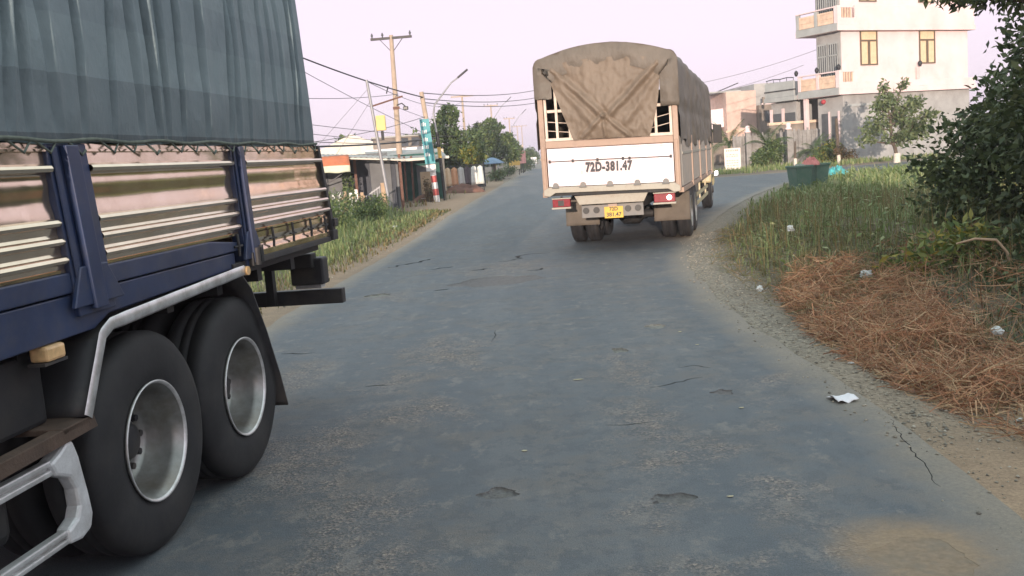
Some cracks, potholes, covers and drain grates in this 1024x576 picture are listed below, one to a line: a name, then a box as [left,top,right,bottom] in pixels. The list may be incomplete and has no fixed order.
pothole [475,487,519,499]
pothole [651,492,698,504]
crack [893,421,939,486]
